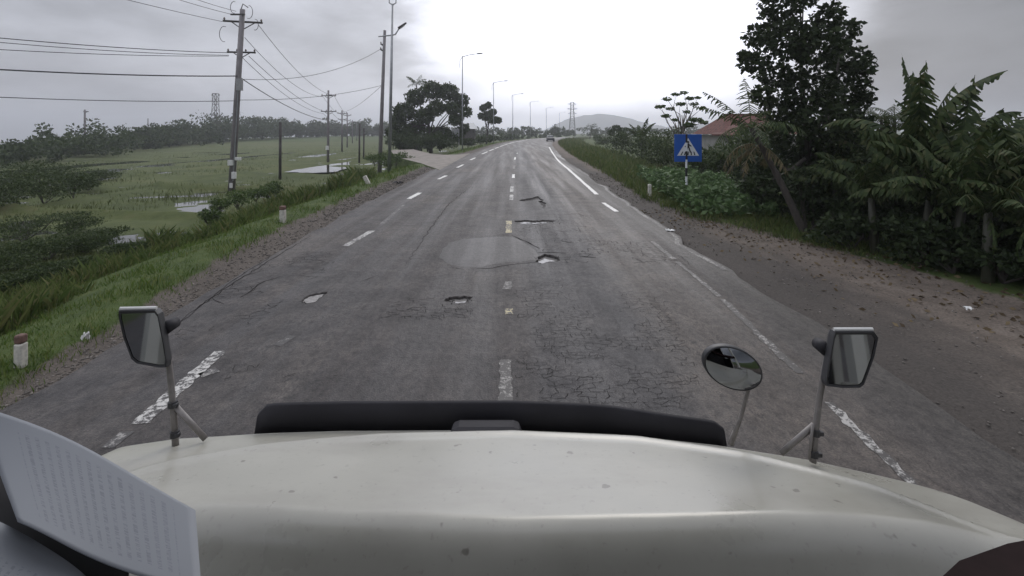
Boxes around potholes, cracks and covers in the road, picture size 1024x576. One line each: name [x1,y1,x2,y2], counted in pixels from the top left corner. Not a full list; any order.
pothole [445,295,472,304]
crack [175,241,372,339]
crack [514,278,699,409]
pothole [301,292,327,304]
pothole [534,254,560,264]
